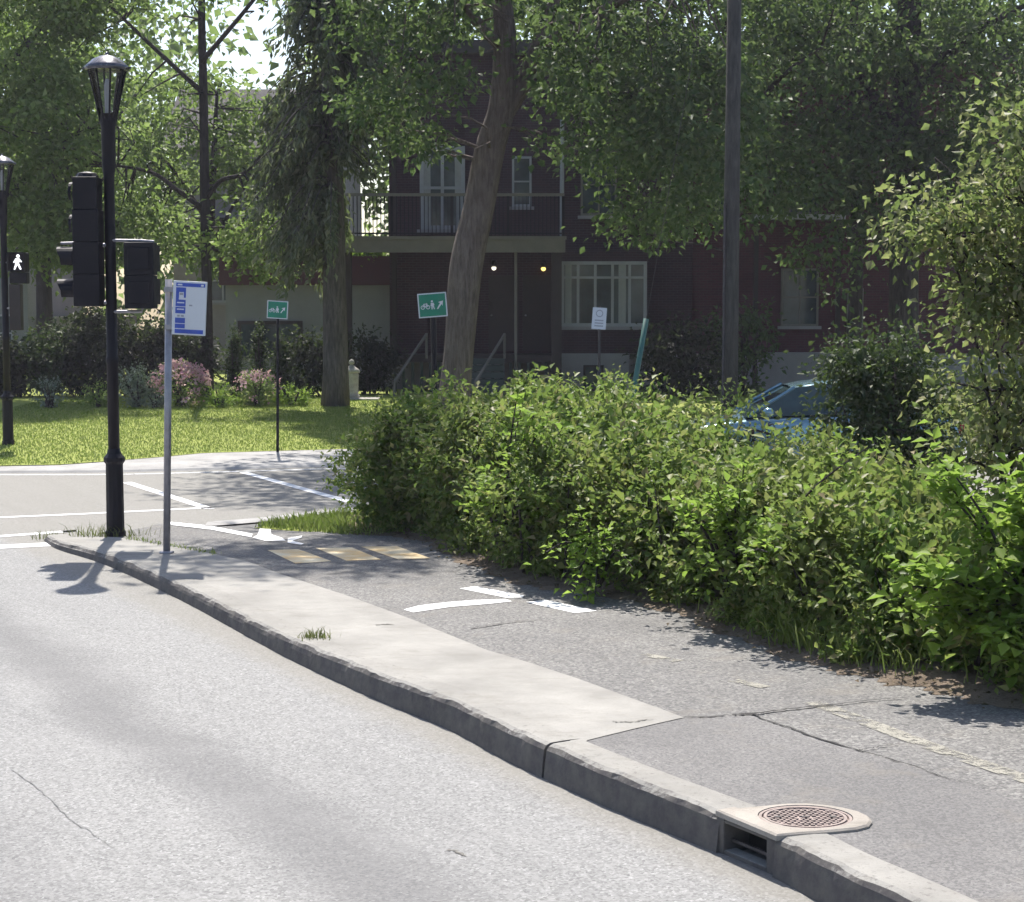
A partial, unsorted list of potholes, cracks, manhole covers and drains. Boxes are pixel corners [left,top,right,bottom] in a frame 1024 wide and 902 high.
crack [689,696,967,783]
drain grate [716,807,781,875]
manhole cover [718,803,872,841]
crack [13,770,114,848]
